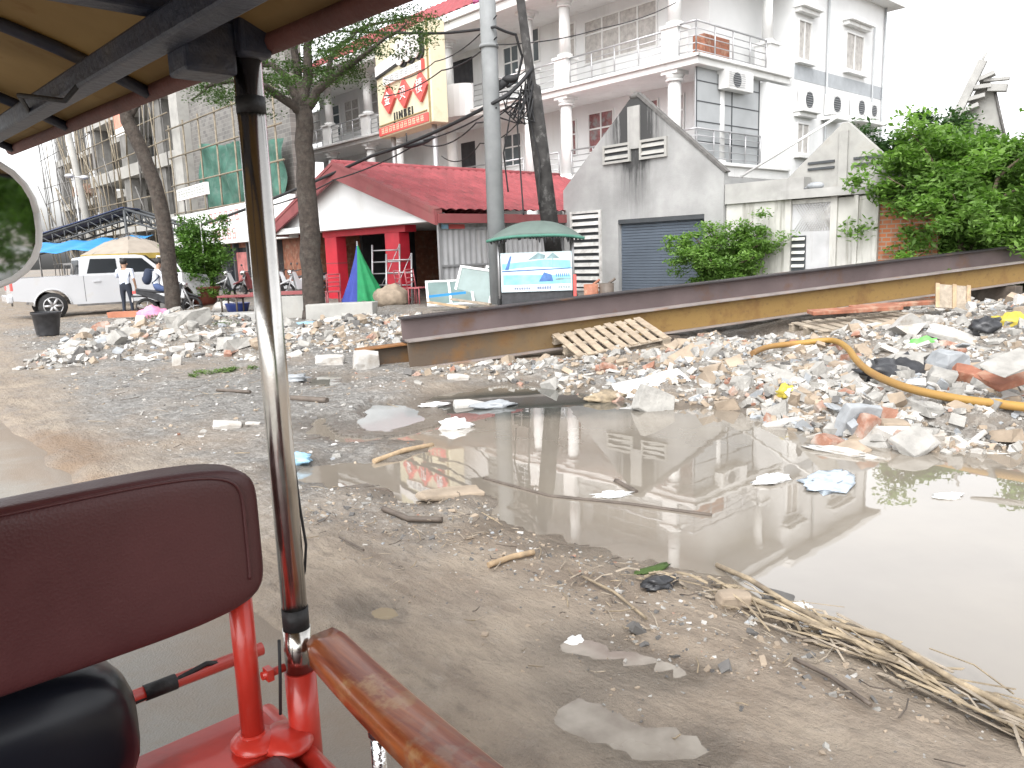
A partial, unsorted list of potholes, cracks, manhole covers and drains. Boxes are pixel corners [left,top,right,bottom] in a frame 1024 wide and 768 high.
pothole [297,385,1024,711]
